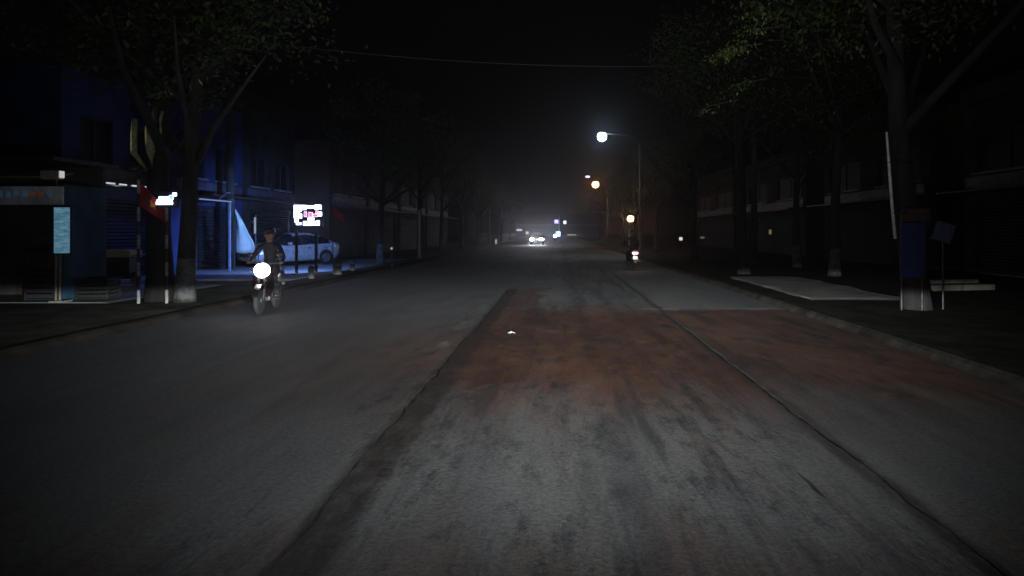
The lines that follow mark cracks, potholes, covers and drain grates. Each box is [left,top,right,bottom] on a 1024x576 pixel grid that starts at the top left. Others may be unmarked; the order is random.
crack [799,474,828,500]
